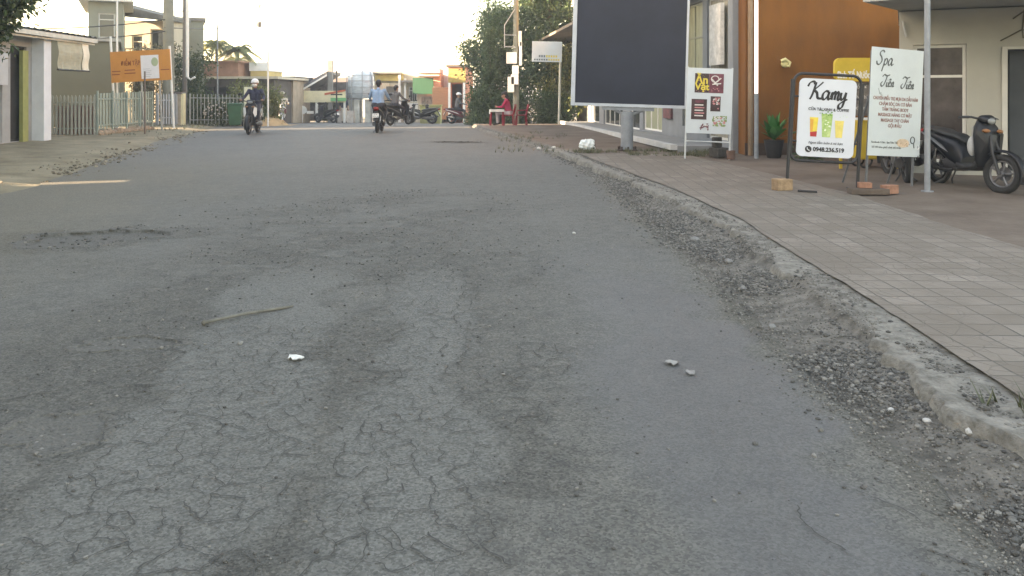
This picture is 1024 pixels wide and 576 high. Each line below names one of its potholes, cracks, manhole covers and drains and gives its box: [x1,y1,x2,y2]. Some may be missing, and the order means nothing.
crack [797,505,846,550]
pothole [6,226,189,249]
crack [5,322,338,576]
crack [299,264,511,576]
crack [497,342,574,427]
